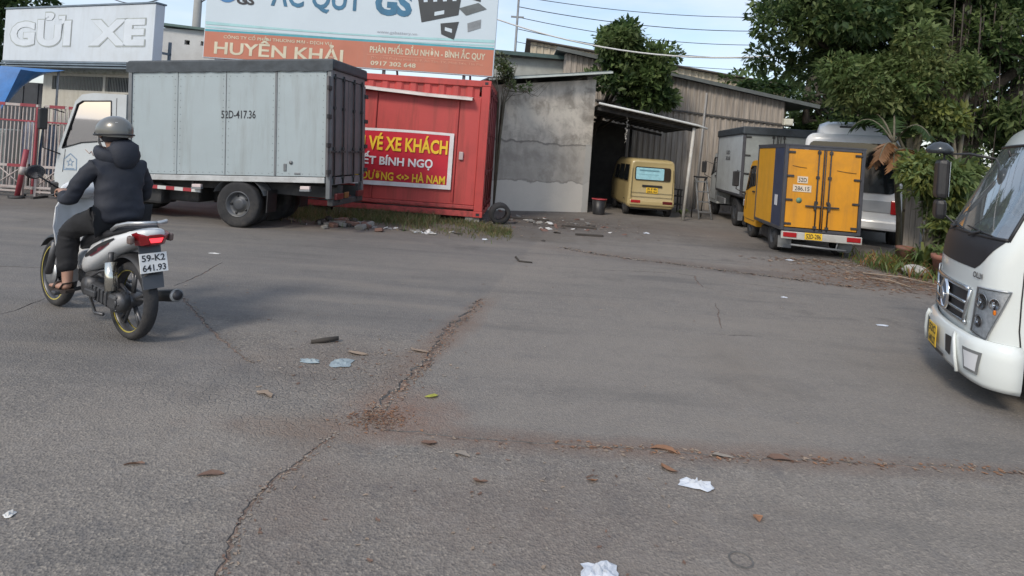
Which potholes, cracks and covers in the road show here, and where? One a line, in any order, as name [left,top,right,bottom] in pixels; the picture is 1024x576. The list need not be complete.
crack [559,247,864,289]
crack [174,263,255,364]
crack [214,435,333,576]
crack [367,299,483,421]
